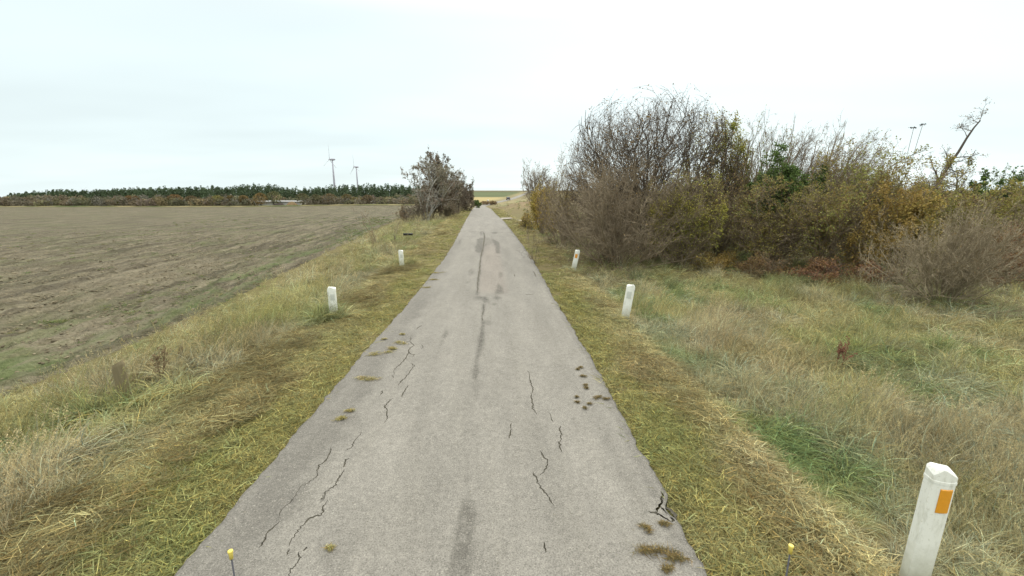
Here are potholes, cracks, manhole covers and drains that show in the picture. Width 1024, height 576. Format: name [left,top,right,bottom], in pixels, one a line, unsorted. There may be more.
crack [529,374,562,505]
crack [649,496,678,522]
crack [261,434,361,576]
crack [380,325,423,423]
